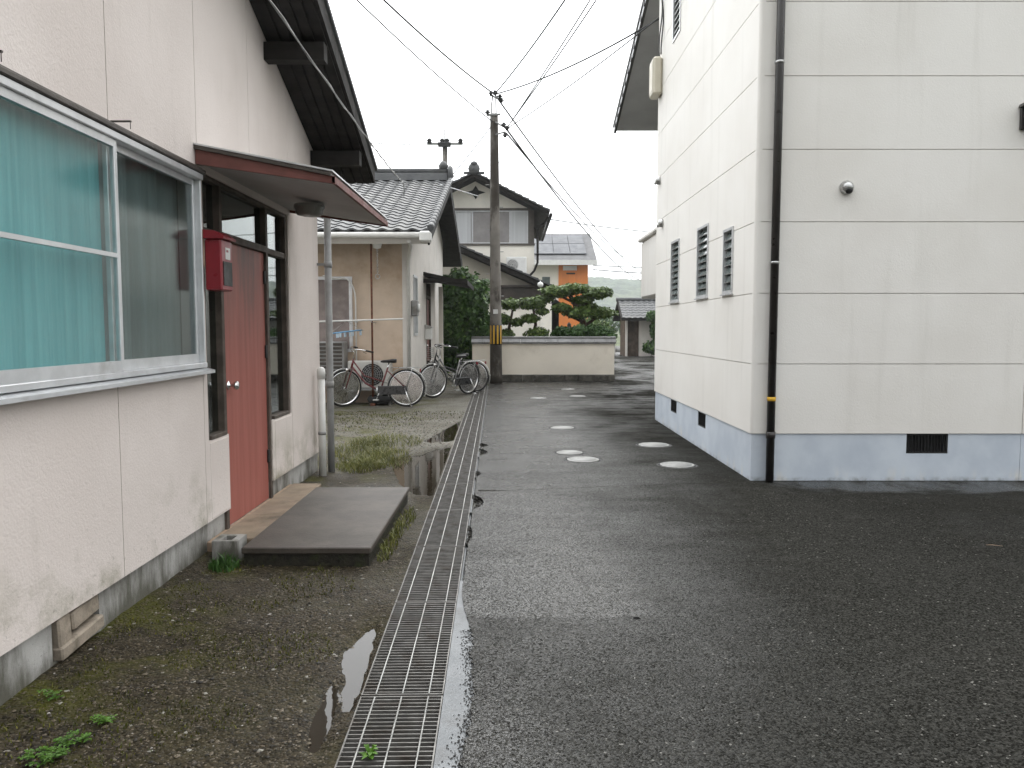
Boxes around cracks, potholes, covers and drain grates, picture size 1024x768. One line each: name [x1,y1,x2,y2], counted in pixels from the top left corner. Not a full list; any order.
drain grate [395,547,464,606]
drain grate [361,602,456,697]
drain grate [452,437,480,449]
drain grate [439,464,476,484]
drain grate [334,696,443,768]
manhole cover [656,461,698,469]
drain grate [416,510,470,551]
drain grate [429,484,474,510]
drain grate [456,427,482,438]
drain grate [446,449,479,467]
drain grate [460,419,483,427]
